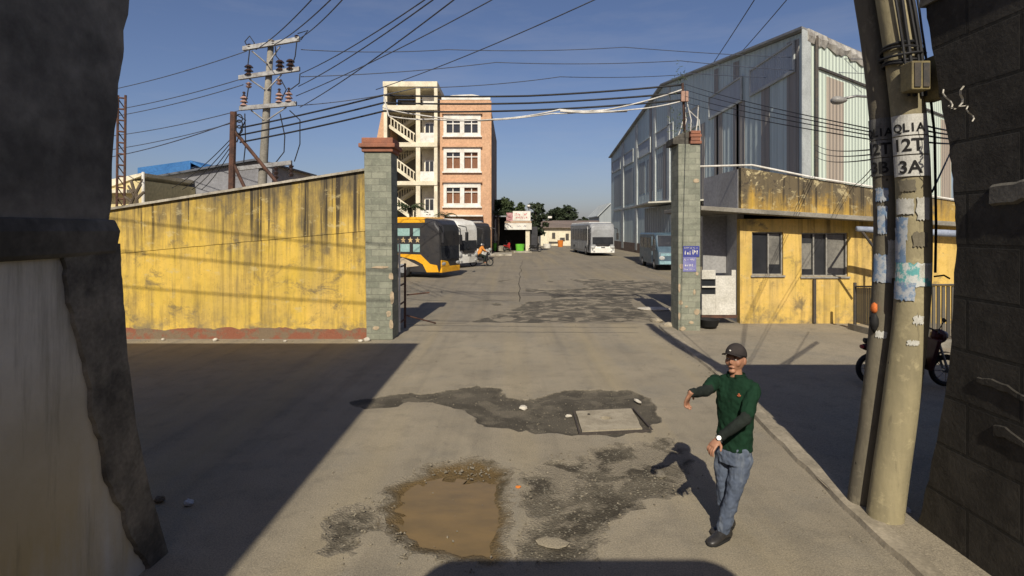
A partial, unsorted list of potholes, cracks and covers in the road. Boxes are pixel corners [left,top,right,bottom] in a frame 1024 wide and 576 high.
crack [407,261,523,302]
pothole [372,455,518,568]
manhole cover [573,408,653,435]
